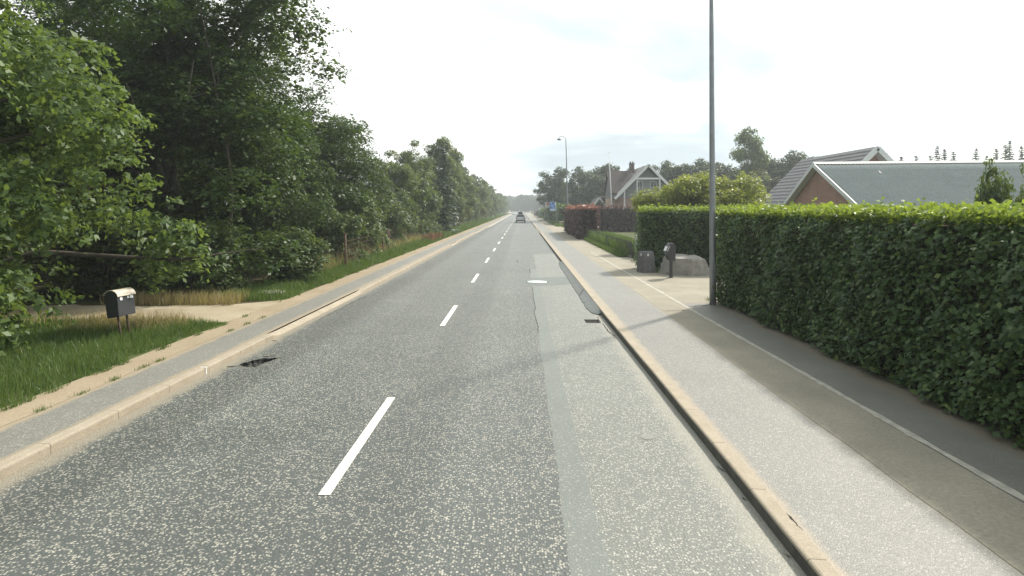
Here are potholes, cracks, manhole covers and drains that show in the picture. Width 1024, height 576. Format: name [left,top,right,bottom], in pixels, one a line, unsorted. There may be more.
pothole [227,355,279,368]
